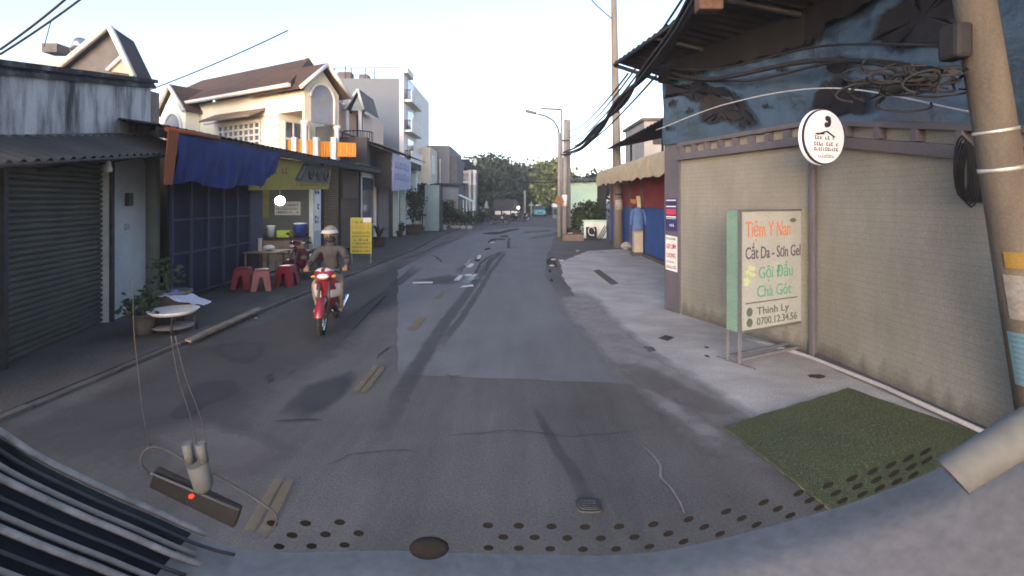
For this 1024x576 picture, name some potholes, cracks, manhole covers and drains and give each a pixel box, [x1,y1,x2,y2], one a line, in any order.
manhole cover [575,498,602,513]
crack [454,430,685,514]
crack [326,450,412,465]
drain grate [592,269,621,286]
